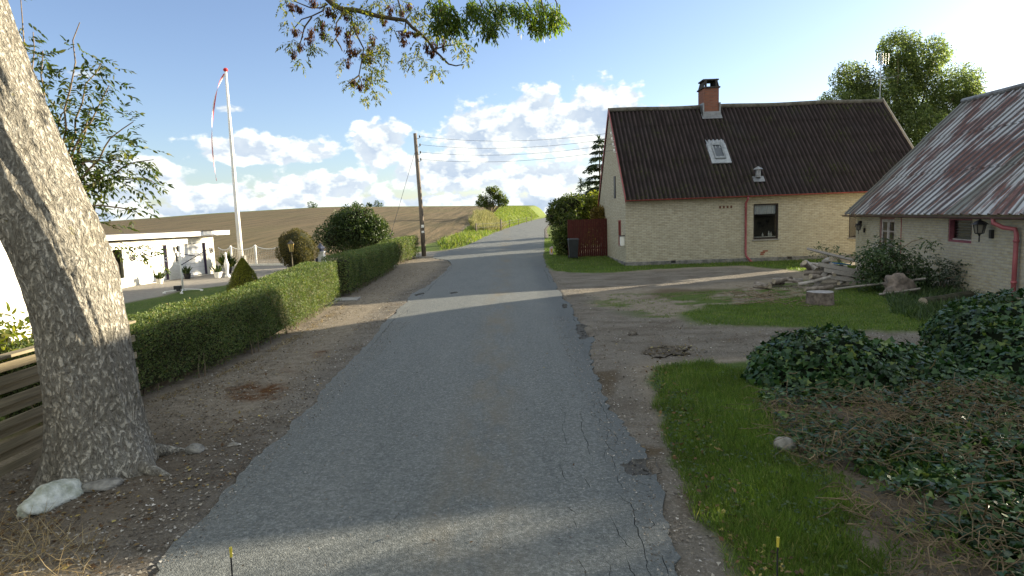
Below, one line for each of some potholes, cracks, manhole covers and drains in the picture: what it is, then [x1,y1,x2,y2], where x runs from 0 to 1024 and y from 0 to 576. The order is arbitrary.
crack [560,403,668,576]
pothole [643,345,692,358]
pothole [576,324,596,339]
pothole [620,457,662,476]
